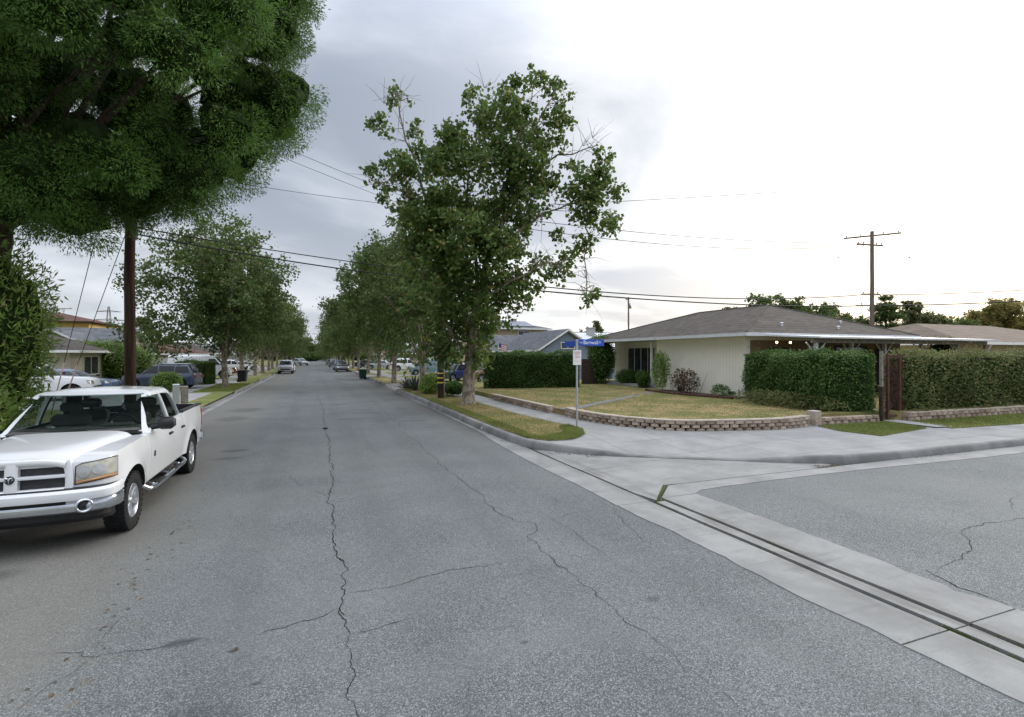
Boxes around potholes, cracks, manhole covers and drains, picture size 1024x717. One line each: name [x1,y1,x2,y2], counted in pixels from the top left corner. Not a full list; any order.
crack [920,496,1020,608]
crack [262,391,510,717]
crack [17,621,207,710]
crack [361,393,744,709]
